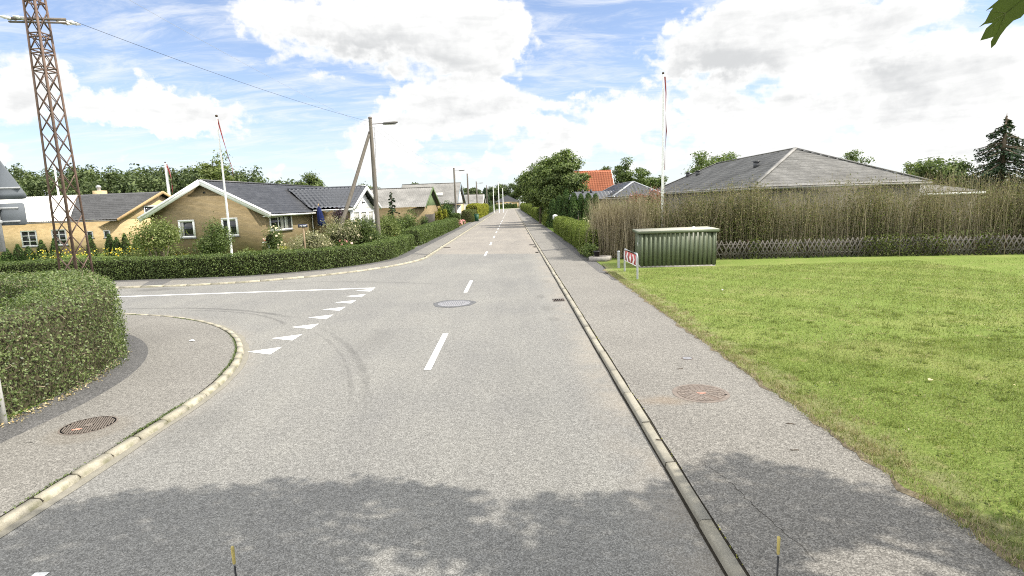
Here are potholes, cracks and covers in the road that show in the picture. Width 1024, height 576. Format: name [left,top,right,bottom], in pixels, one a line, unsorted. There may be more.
manhole cover [672,384,730,403]
manhole cover [433,300,476,308]
manhole cover [57,416,118,435]
